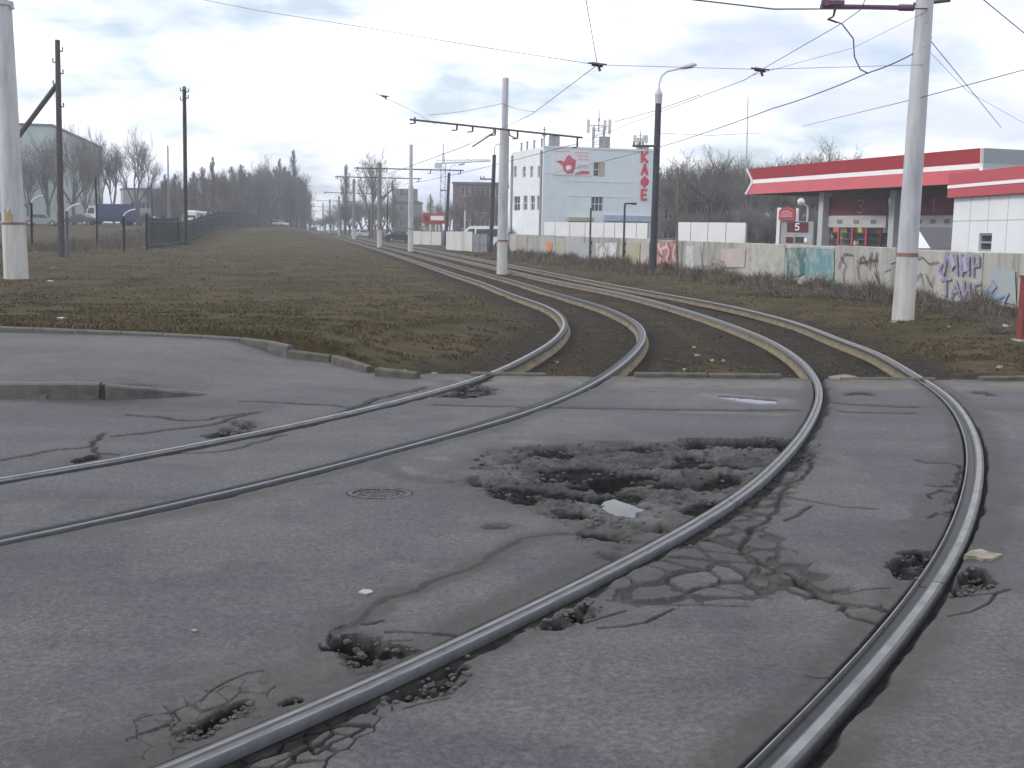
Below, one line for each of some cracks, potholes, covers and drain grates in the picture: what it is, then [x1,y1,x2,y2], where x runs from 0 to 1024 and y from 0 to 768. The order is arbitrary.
crack [1,386,801,461]
pothole [317,632,425,678]
pothole [429,377,501,399]
pothole [525,597,603,631]
manhole cover [348,488,412,499]
pothole [884,549,933,584]
crack [913,459,965,520]
pothole [200,419,262,439]
pothole [171,695,305,745]
pothole [444,435,803,562]
crack [125,670,275,760]
pothole [70,454,103,464]
